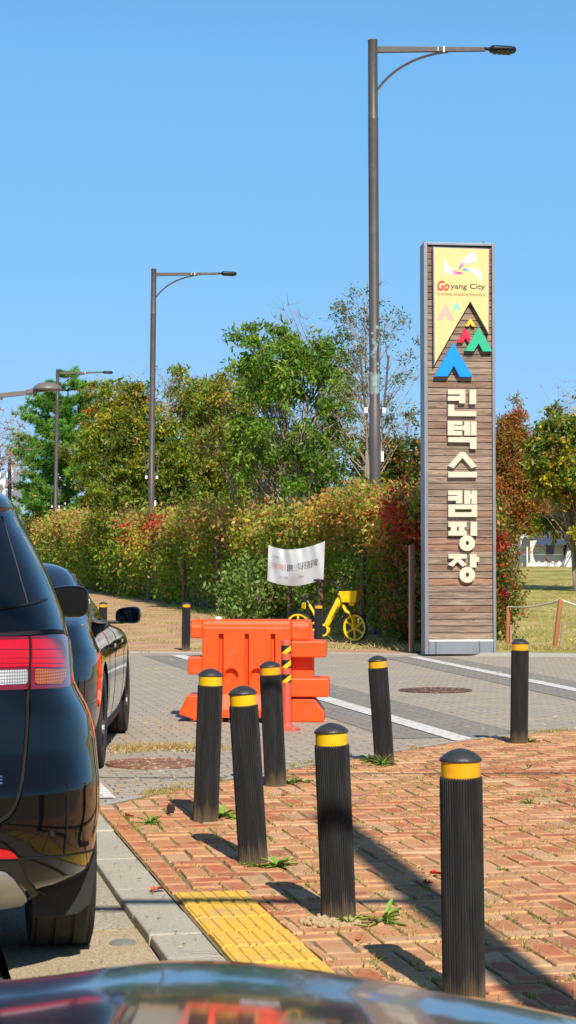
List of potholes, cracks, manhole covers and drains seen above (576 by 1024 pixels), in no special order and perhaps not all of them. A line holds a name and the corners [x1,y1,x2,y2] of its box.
manhole cover [105,758,195,769]
